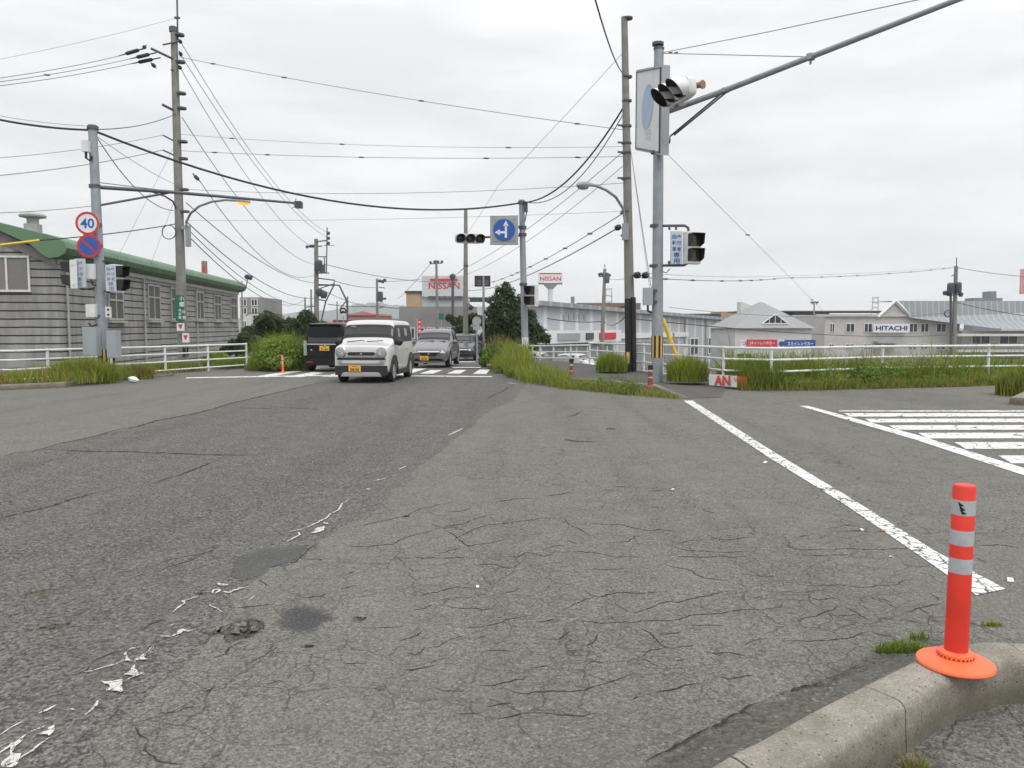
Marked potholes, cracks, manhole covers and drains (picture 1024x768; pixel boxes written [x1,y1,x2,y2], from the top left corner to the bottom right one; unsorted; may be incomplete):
crack [2,485,124,518]
crack [343,498,940,718]
crack [52,449,261,484]
crack [642,658,874,765]
pothole [218,618,265,643]
crack [197,604,277,662]
crack [135,707,187,764]
